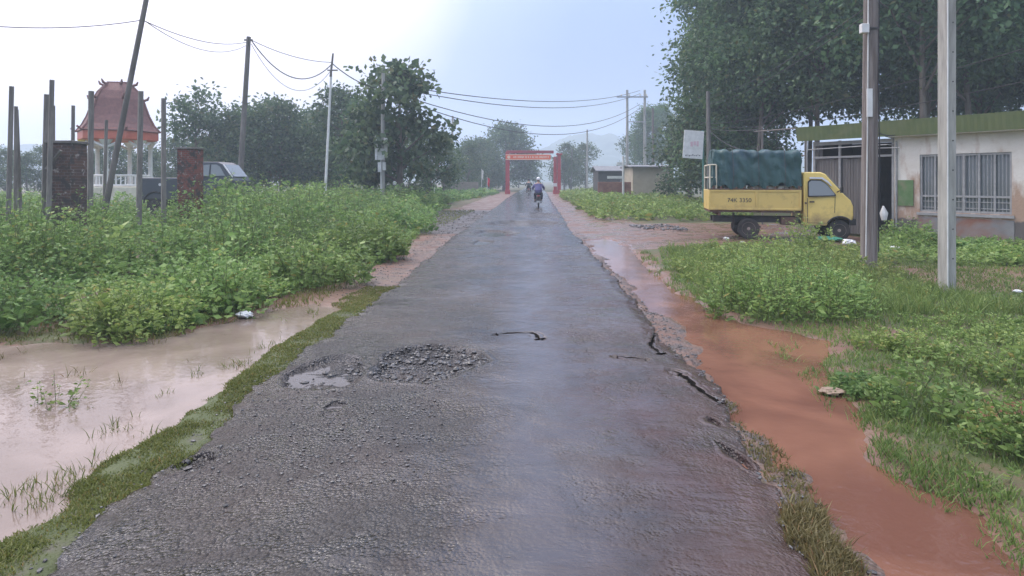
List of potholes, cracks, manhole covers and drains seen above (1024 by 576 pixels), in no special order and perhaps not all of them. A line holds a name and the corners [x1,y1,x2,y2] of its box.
crack [617,327,729,413]
crack [497,331,545,340]
pothole [698,414,731,430]
pothole [271,352,378,393]
pothole [710,437,762,476]
pothole [362,342,499,387]
